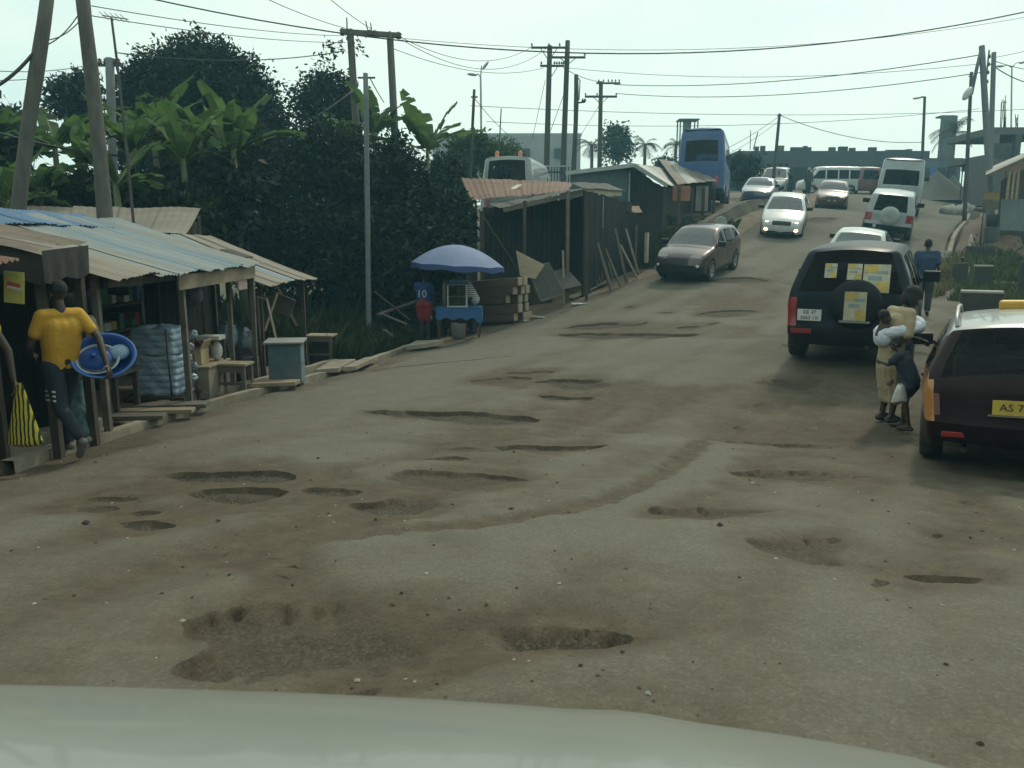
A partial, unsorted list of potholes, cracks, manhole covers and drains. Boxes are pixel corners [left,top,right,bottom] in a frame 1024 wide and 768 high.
pothole [484,625,634,653]
pothole [373,470,528,492]
pothole [743,533,864,566]
pothole [297,487,363,497]
pothole [362,410,541,425]
pothole [179,487,289,506]
pothole [647,506,786,520]
pothole [159,470,297,484]
pothole [533,379,629,392]
pothole [341,495,441,516]
pothole [470,376,533,386]
pothole [903,574,985,584]
